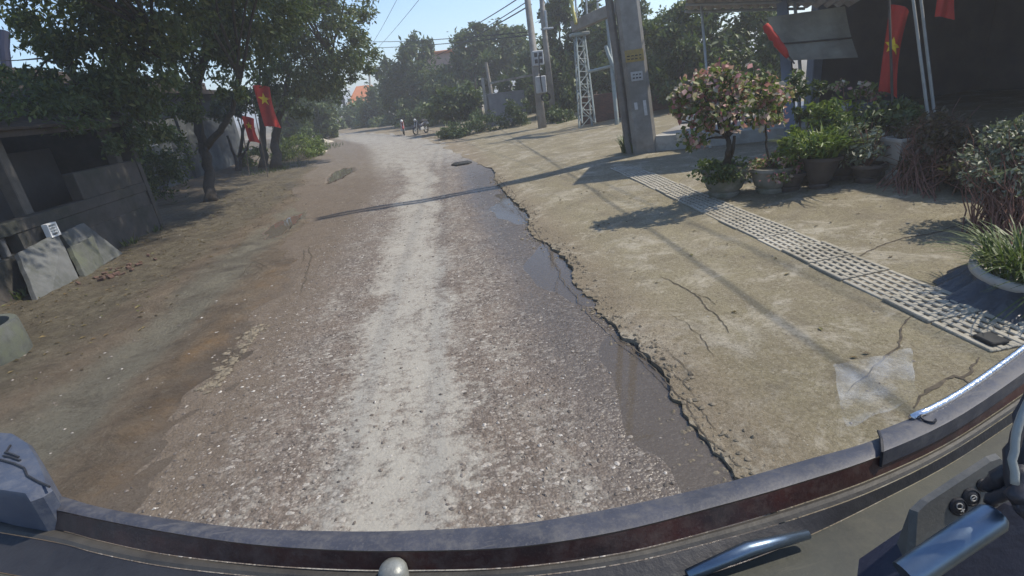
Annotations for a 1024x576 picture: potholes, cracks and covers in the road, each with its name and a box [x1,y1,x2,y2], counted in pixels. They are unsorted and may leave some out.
crack [301,247,312,292]
crack [845,215,979,264]
crack [849,316,980,408]
pothole [327,167,354,184]
pothole [262,213,303,240]
crack [512,202,742,467]
